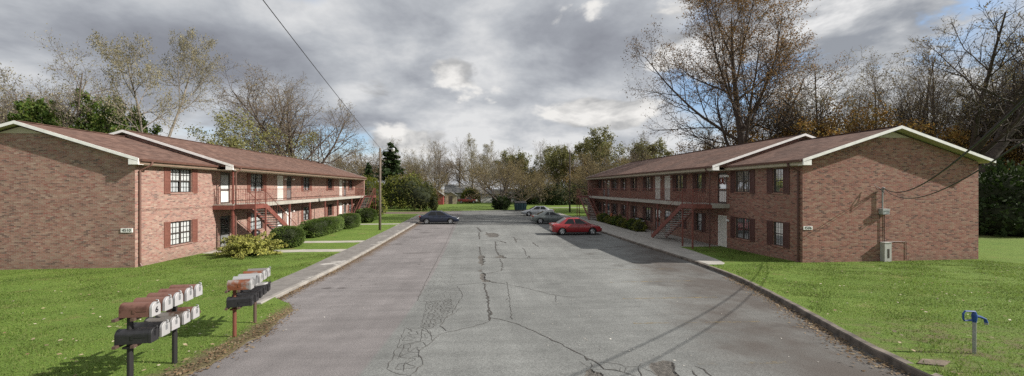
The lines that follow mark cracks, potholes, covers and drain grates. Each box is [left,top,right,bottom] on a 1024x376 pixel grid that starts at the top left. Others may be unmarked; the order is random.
pothole [649,360,680,376]
crack [387,227,655,376]
